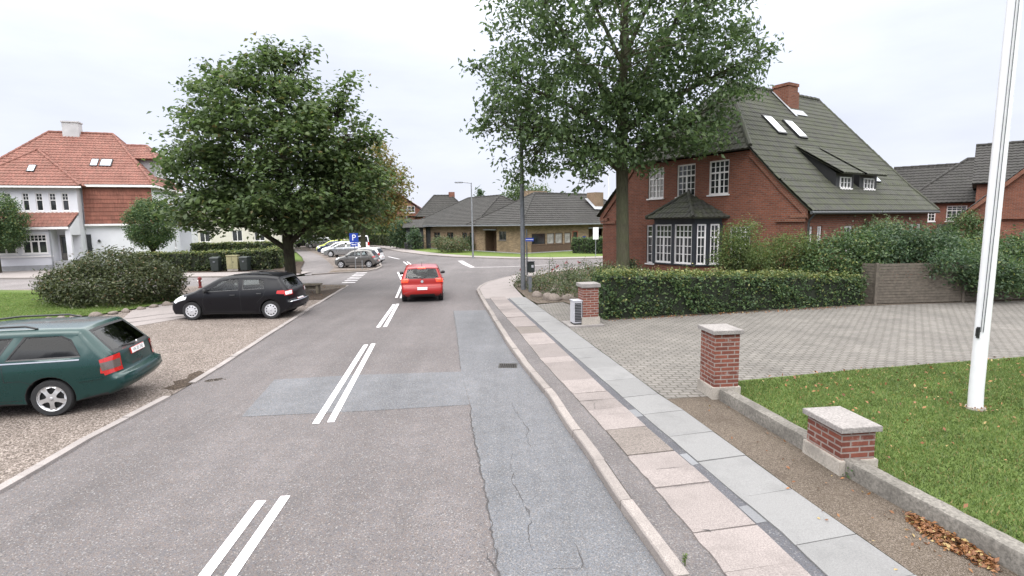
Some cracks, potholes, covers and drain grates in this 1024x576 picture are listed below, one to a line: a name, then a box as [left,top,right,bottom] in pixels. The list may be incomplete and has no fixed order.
crack [510,402,535,551]
